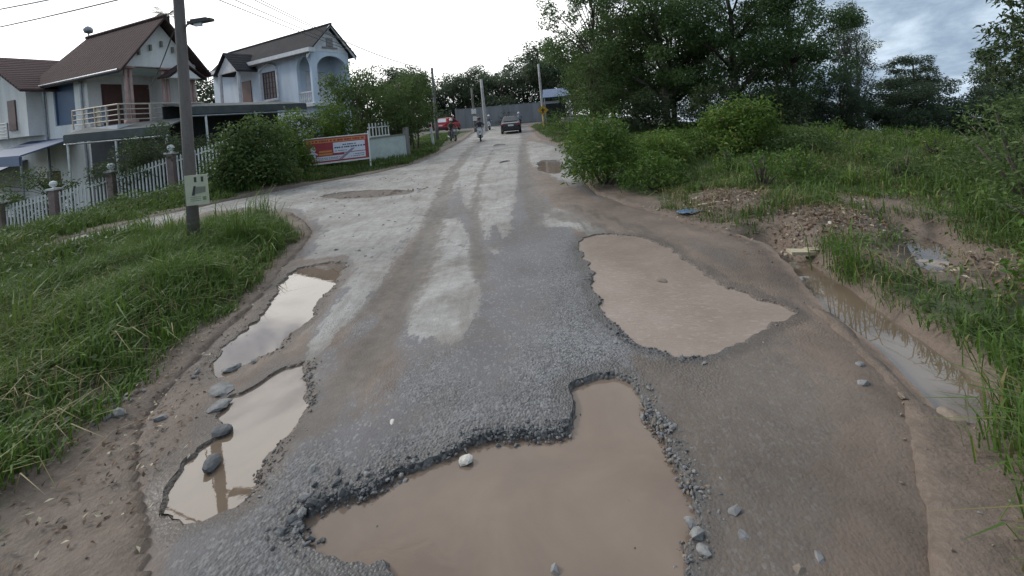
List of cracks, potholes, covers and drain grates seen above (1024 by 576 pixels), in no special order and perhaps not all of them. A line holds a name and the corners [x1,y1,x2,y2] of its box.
pothole [320,189,414,199]
pothole [209,261,346,378]
pothole [536,160,566,174]
pothole [300,371,702,576]
pothole [576,233,798,357]
pothole [159,361,311,525]
